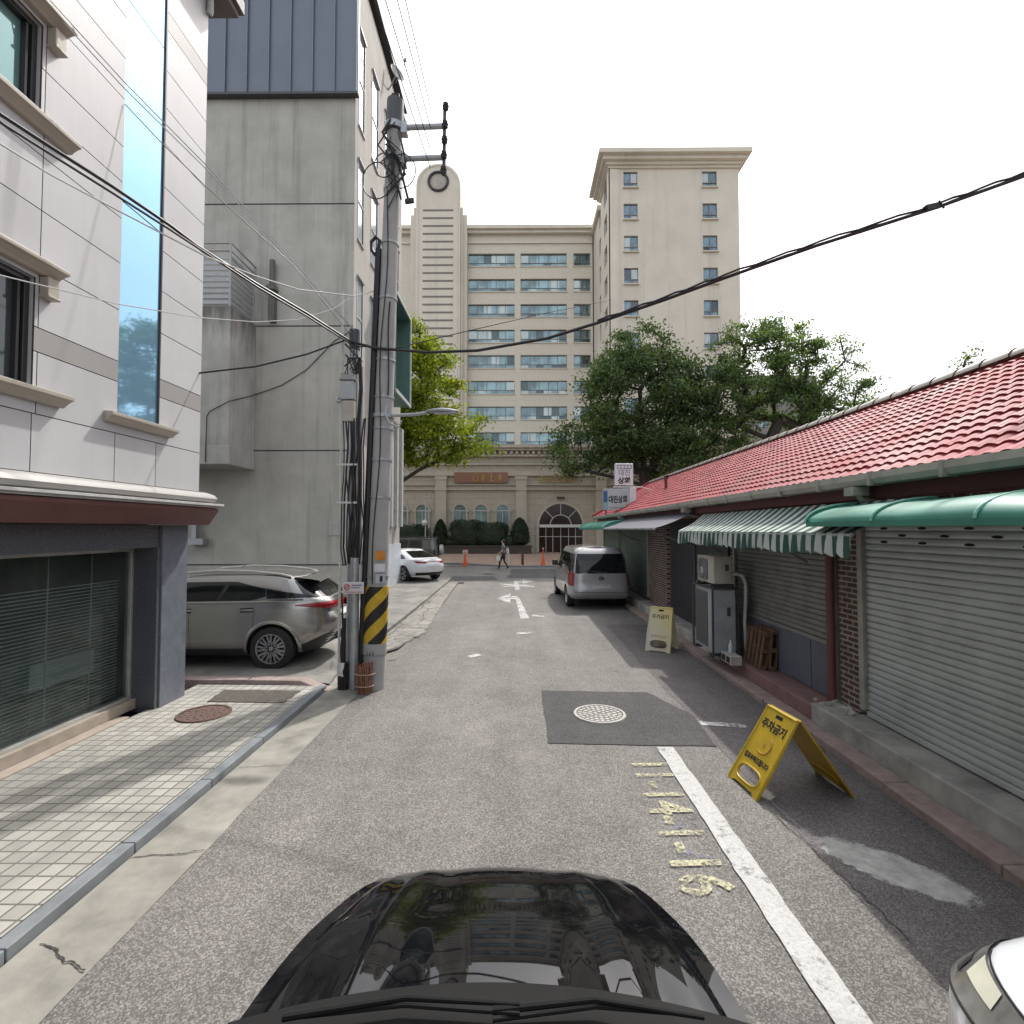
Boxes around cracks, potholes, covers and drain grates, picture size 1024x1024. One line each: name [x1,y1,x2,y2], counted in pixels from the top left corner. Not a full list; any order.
crack [132,849,204,858]
crack [39,943,86,971]
manhole cover [573,704,627,724]
manhole cover [174,704,233,723]
